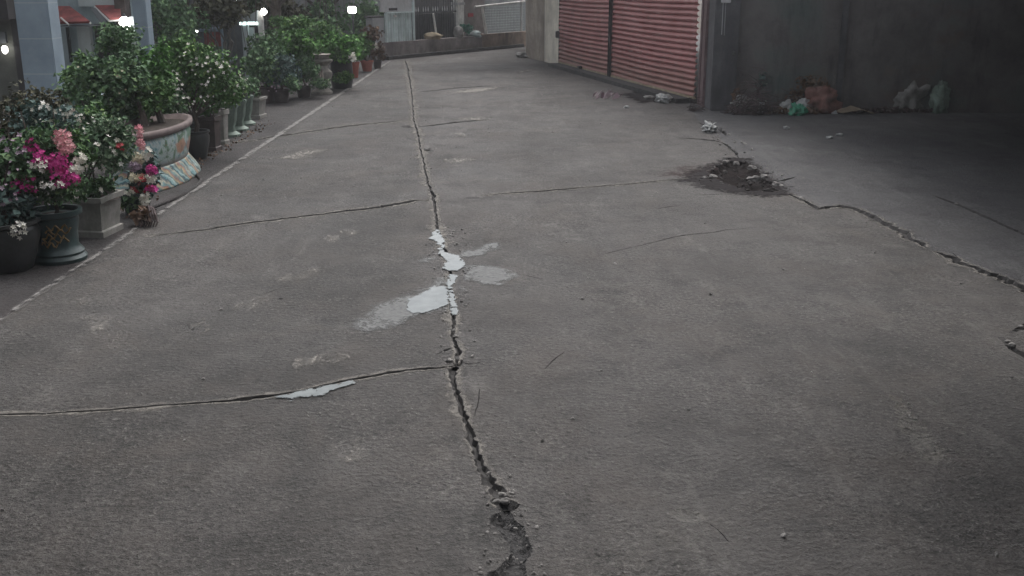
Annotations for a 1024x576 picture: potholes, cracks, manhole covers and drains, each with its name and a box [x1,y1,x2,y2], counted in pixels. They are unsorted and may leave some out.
crack [437,346,519,511]
pothole [708,161,779,192]
crack [776,177,1024,293]
crack [602,227,754,255]
